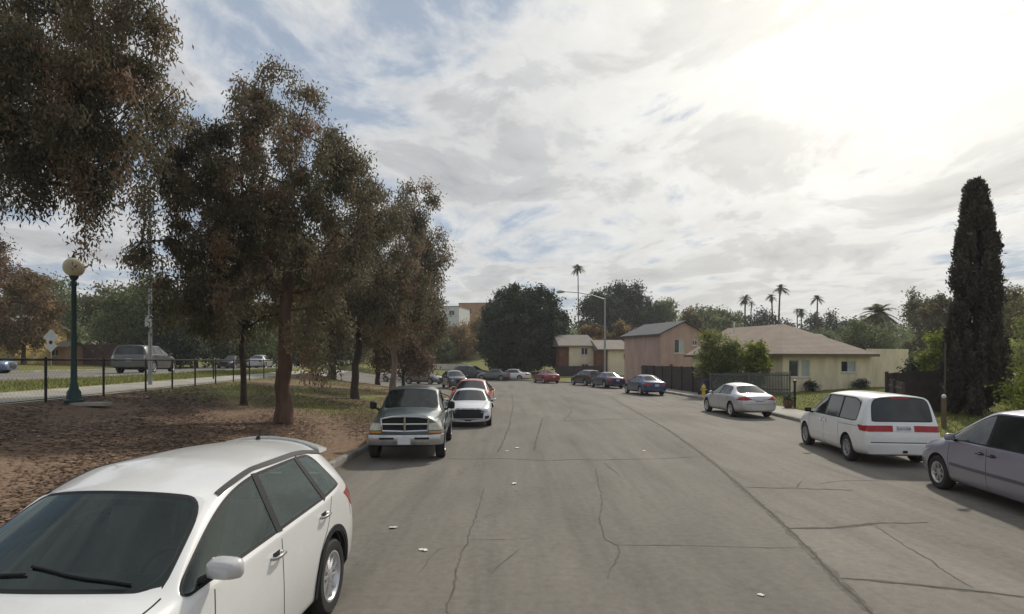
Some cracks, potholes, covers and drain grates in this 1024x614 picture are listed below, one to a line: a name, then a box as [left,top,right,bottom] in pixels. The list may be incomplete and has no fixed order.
crack [876,526,972,587]
crack [449,398,802,579]
crack [420,489,524,614]
